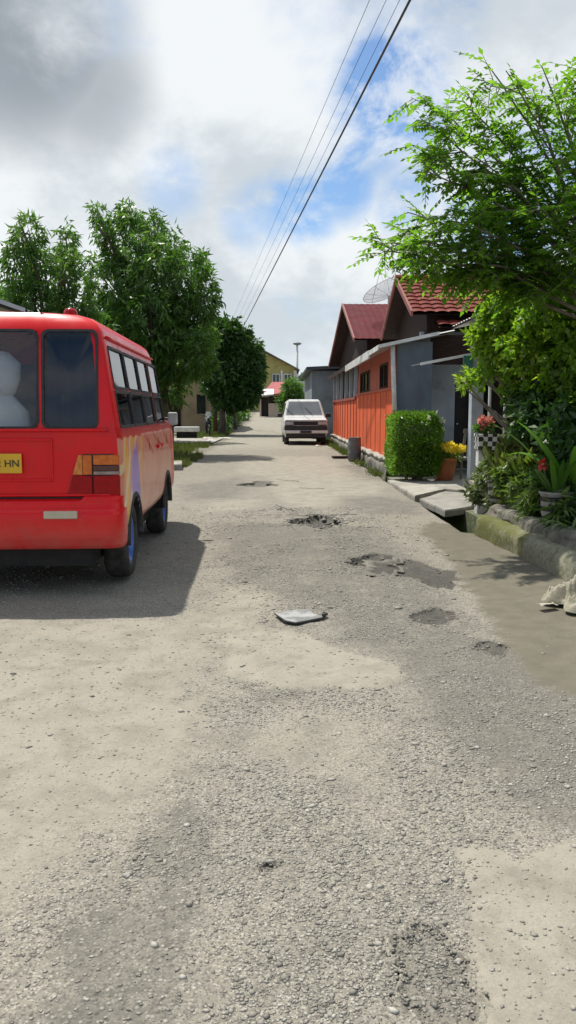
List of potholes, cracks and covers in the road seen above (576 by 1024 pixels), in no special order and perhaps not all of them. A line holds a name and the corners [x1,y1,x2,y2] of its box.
pothole [470,641,511,659]
pothole [406,606,461,628]
pothole [230,480,282,488]
pothole [383,914,494,1024]
pothole [341,551,405,579]
pothole [282,515,349,530]
pothole [361,557,465,592]
